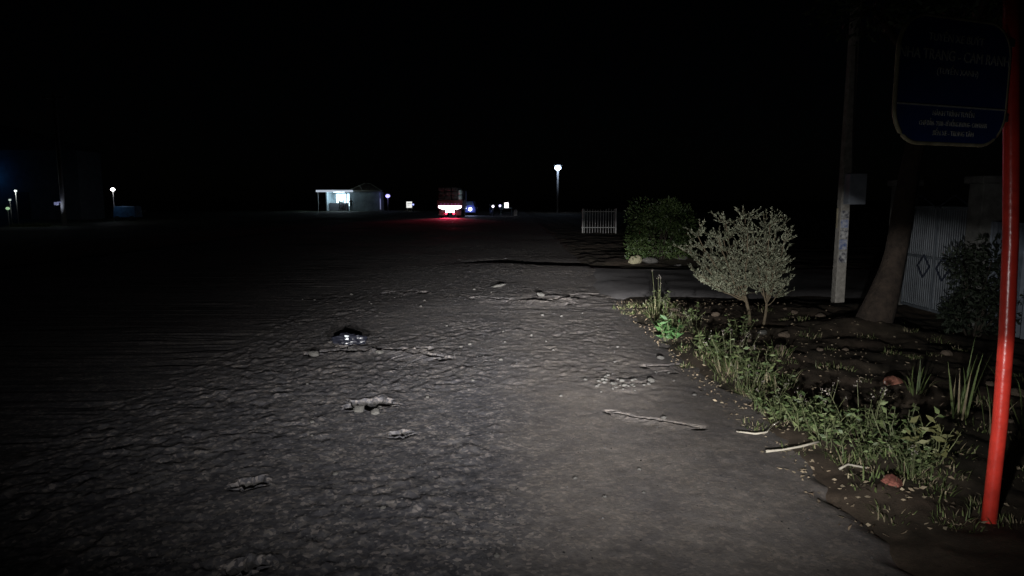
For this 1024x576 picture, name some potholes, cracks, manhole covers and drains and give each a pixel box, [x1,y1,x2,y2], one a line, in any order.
crack [475,293,614,307]
crack [318,344,445,363]
